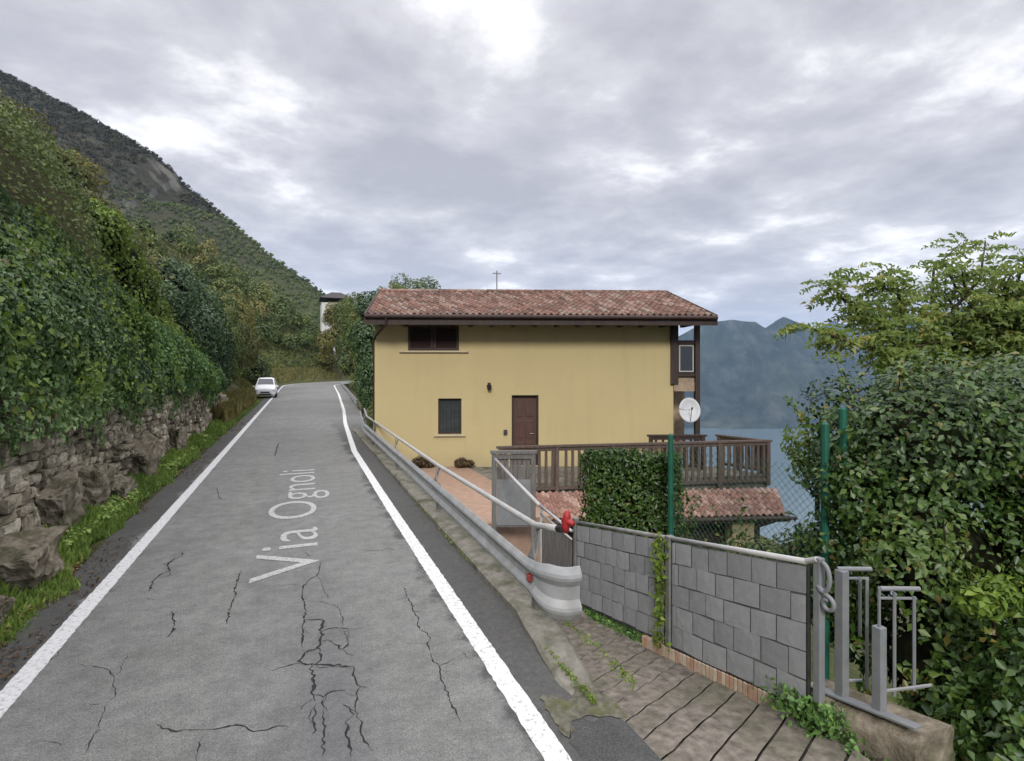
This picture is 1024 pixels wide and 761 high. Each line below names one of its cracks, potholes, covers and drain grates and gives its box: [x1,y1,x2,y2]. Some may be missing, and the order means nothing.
crack [397,586,466,721]
crack [270,552,382,757]
crack [157,724,285,760]
crack [146,543,190,637]
crack [80,656,128,753]
